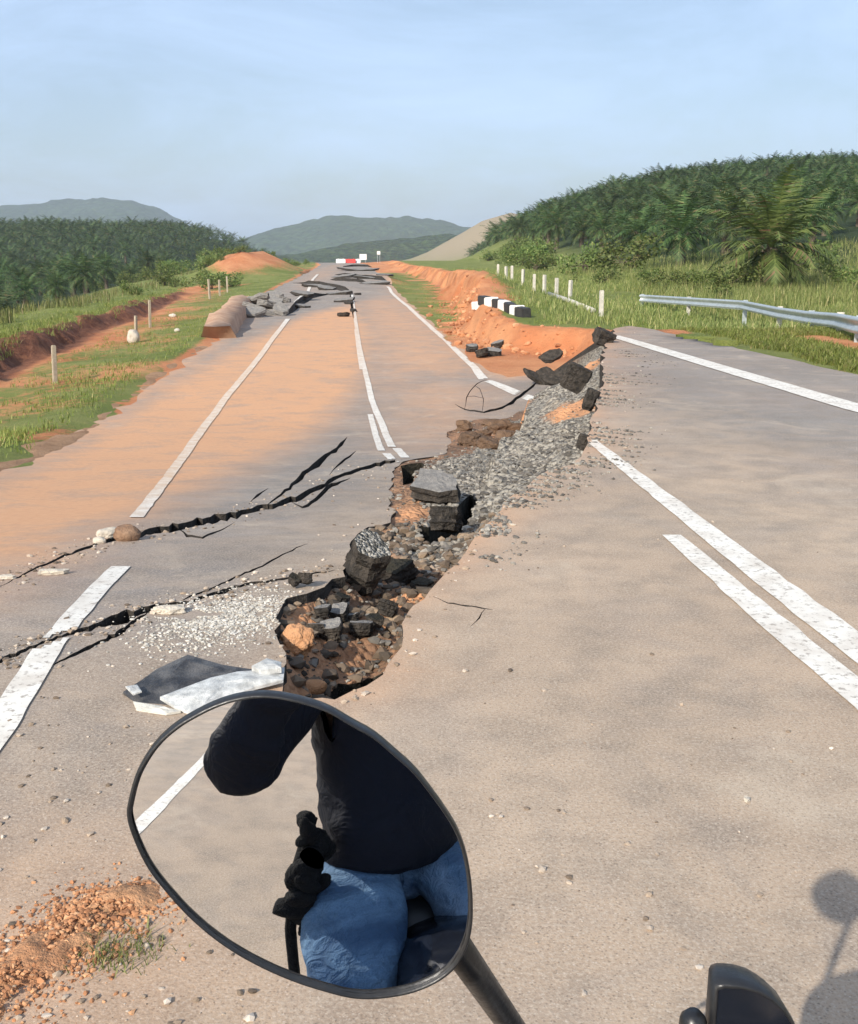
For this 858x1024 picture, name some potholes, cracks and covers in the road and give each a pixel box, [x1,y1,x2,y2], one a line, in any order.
crack [0,330,615,697]
crack [287,264,391,315]
pothole [401,463,426,485]
pothole [419,495,478,544]
